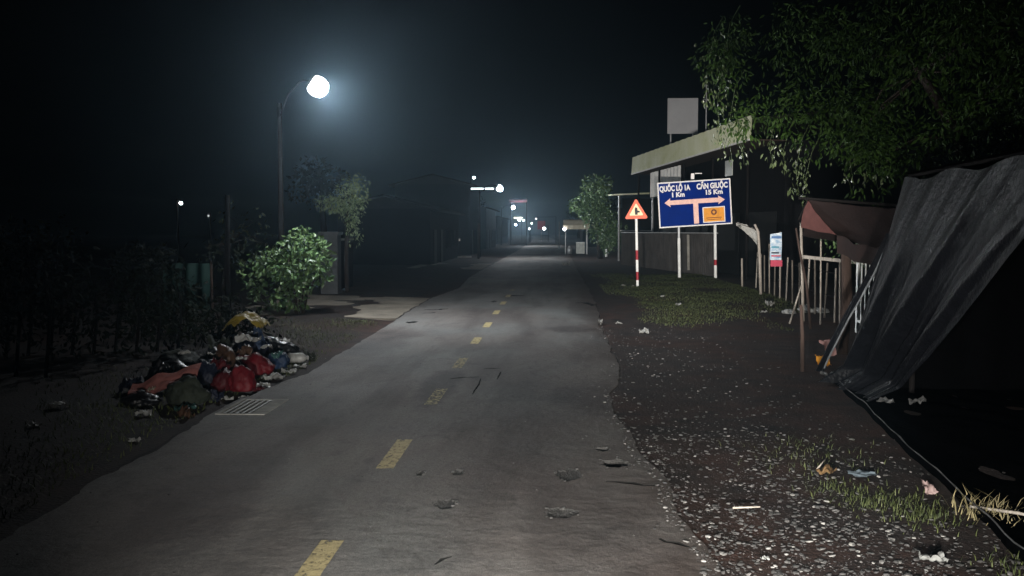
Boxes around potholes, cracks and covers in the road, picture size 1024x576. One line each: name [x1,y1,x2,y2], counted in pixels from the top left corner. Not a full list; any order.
pothole [599,457,635,468]
pothole [554,468,583,482]
pothole [544,507,579,519]
drain grate [215,398,289,415]
pothole [432,498,459,510]
